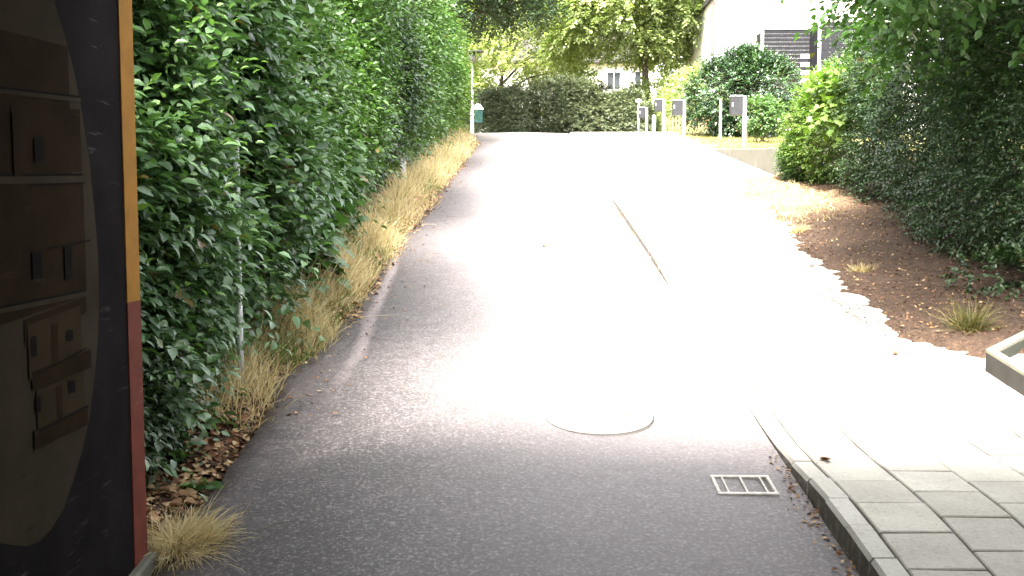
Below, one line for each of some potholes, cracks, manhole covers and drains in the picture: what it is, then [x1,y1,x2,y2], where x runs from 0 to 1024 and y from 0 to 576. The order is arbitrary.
manhole cover [545,399,654,436]
drain grate [710,475,780,497]
